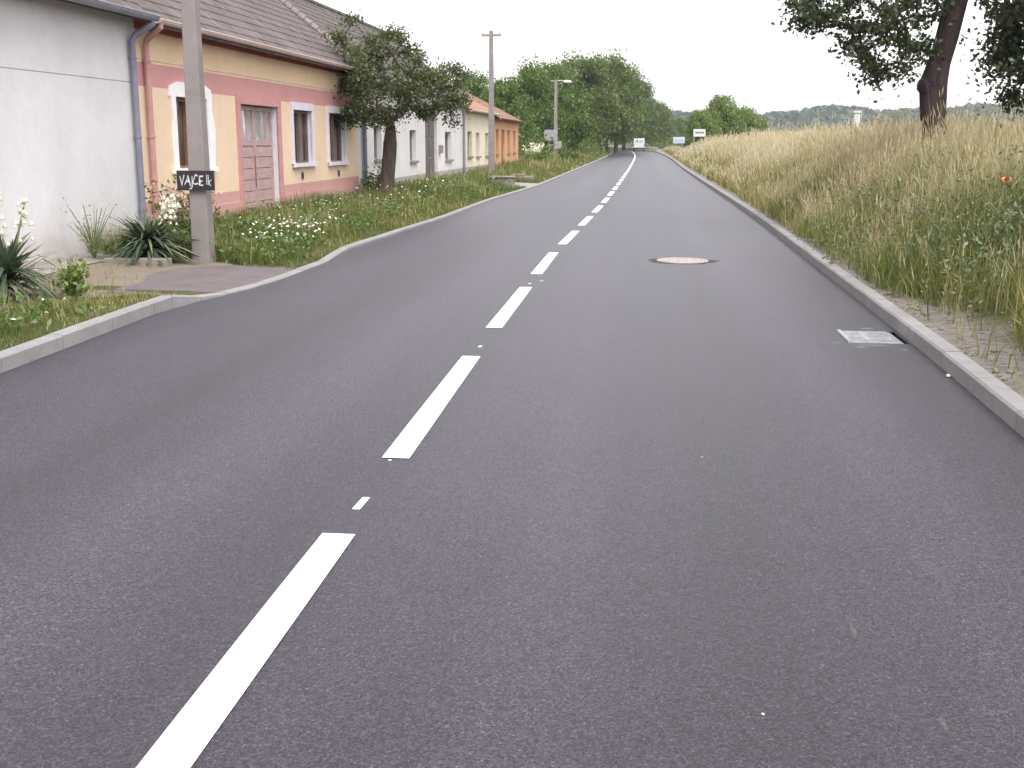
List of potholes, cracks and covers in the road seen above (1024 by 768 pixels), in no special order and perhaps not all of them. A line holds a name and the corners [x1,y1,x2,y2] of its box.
drain grate [836,329,909,344]
